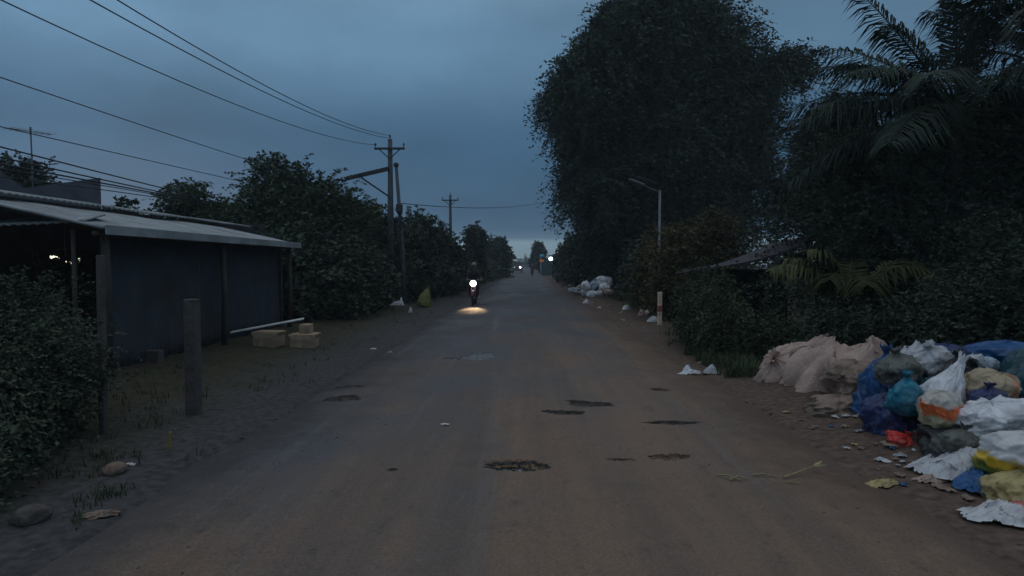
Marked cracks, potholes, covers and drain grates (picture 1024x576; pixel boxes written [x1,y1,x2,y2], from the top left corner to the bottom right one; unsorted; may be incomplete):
pothole [647,453,693,461]
pothole [322,394,362,402]
pothole [480,459,552,472]
